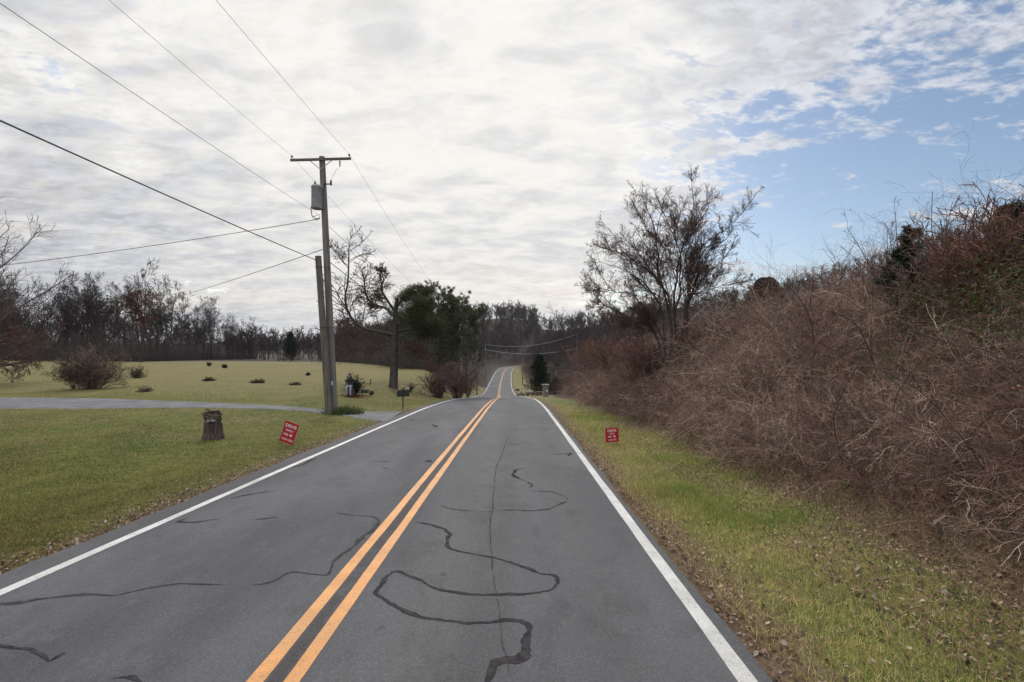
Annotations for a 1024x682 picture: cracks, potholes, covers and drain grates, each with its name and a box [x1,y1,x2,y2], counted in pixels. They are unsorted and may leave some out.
crack [441,438,567,671]
